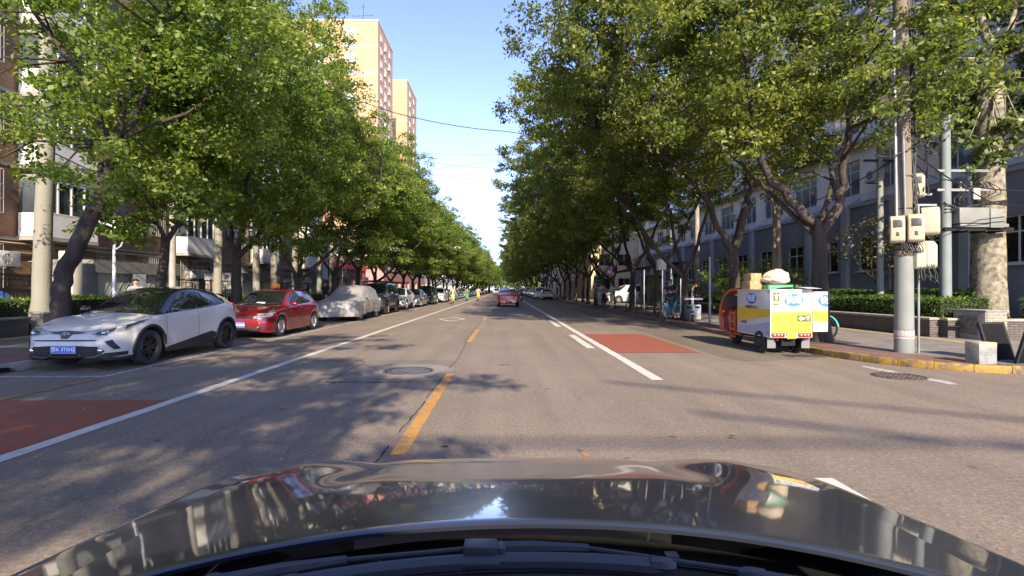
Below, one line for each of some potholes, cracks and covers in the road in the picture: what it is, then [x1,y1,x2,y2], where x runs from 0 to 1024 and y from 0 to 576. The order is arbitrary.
manhole cover [871,372,929,380]
manhole cover [361,364,454,379]
